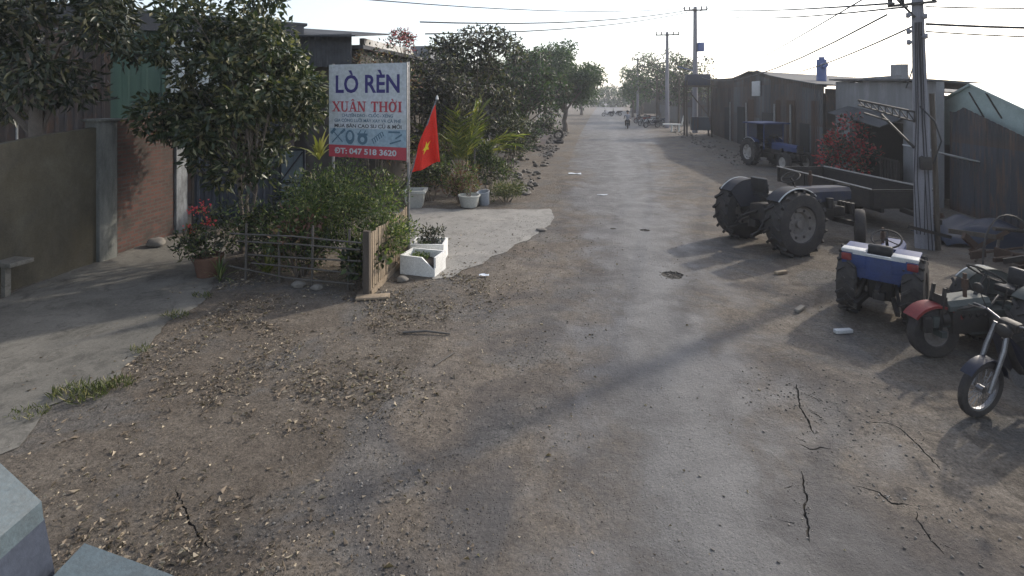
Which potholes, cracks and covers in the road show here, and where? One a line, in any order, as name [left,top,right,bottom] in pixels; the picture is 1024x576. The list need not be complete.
crack [161,487,221,557]
pothole [660,270,688,280]
crack [856,410,954,477]
crack [791,384,833,453]
crack [858,482,959,569]
